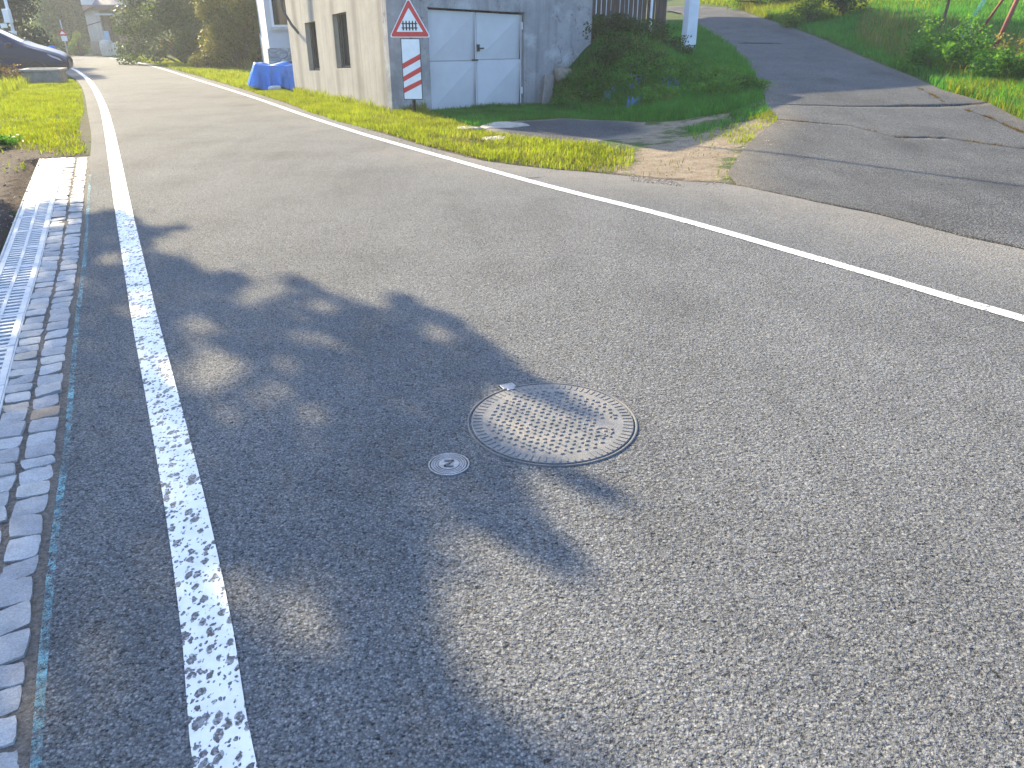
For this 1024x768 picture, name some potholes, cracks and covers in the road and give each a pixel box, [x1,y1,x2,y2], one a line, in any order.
drain grate [0,264,39,290]
drain grate [36,164,63,174]
drain grate [24,190,56,204]
drain grate [32,172,61,183]
crack [790,87,1024,149]
drain grate [13,214,51,232]
drain grate [0,345,15,386]
drain grate [6,228,47,249]
manhole cover [467,382,638,467]
drain grate [0,286,32,316]
manhole cover [428,453,469,476]
drain grate [28,181,59,193]
